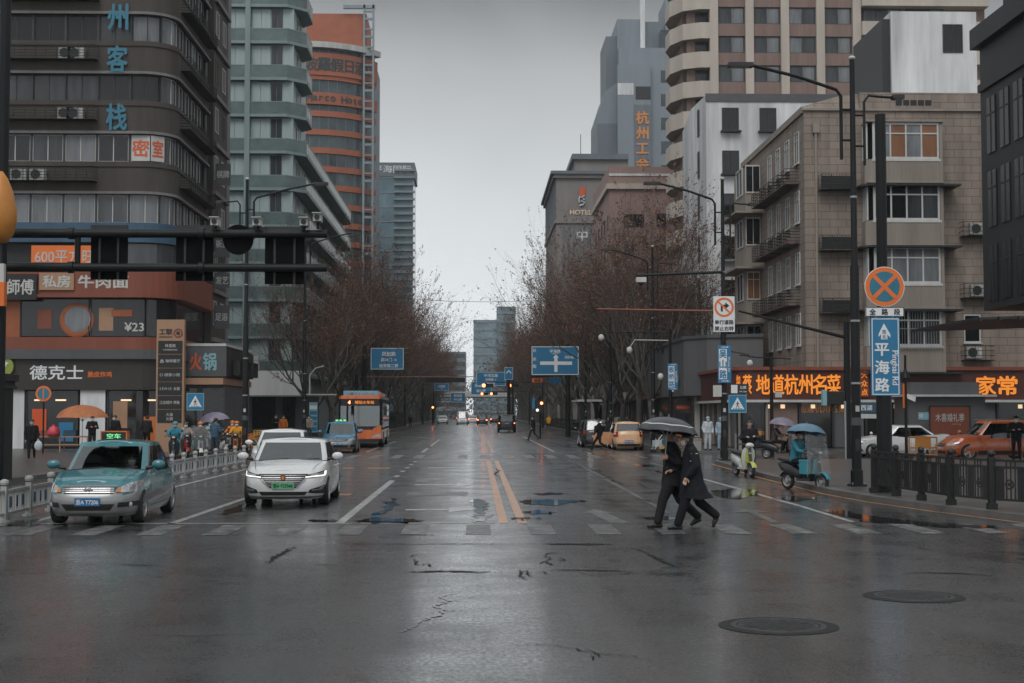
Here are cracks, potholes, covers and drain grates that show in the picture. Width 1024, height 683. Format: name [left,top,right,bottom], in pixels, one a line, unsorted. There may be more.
crack [517,547,677,580]
crack [401,592,461,632]
manhole cover [863,590,966,603]
crack [536,643,649,660]
manhole cover [718,617,840,635]
crack [267,546,296,564]
crack [410,554,491,572]
